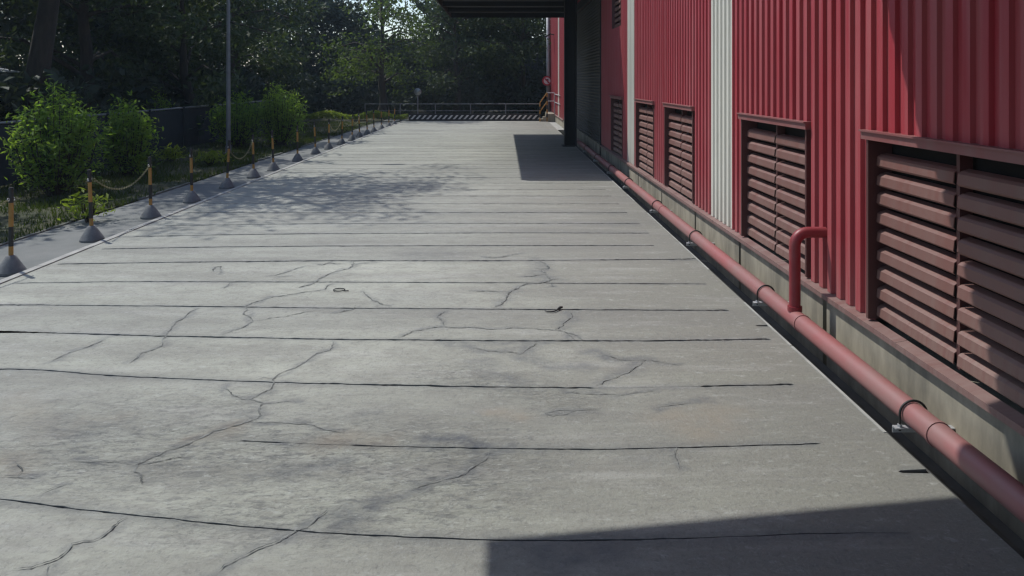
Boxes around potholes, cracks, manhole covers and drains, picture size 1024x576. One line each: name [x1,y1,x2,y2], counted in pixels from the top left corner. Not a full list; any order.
crack [212,510,327,576]
crack [403,311,580,354]
crack [544,354,685,415]
crack [470,262,553,306]
crack [133,310,193,361]
crack [414,454,489,487]
crack [13,517,126,575]
crack [79,341,336,484]
crack [222,262,370,335]
